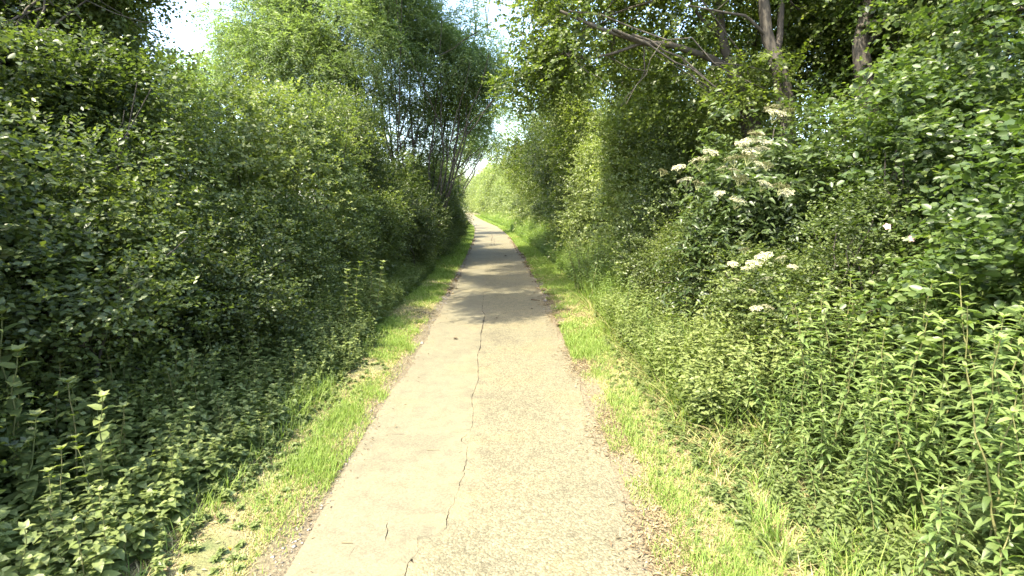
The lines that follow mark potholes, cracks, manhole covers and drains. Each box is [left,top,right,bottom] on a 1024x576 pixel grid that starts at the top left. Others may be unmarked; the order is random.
crack [405,293,487,576]
